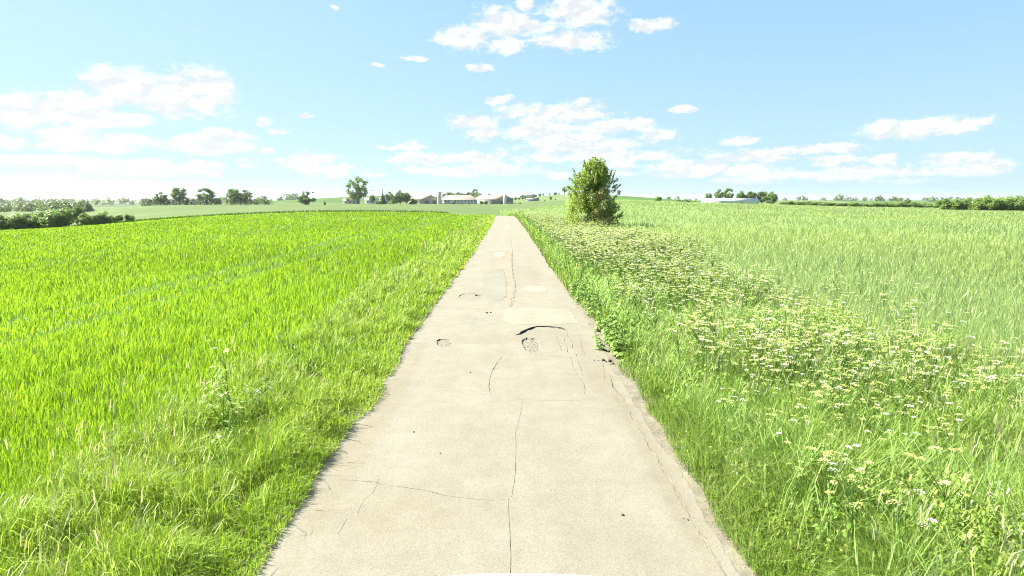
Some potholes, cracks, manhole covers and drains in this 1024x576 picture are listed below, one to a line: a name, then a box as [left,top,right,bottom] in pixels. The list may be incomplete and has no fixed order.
pothole [436,339,453,347]
pothole [521,337,541,353]
crack [489,326,727,575]
